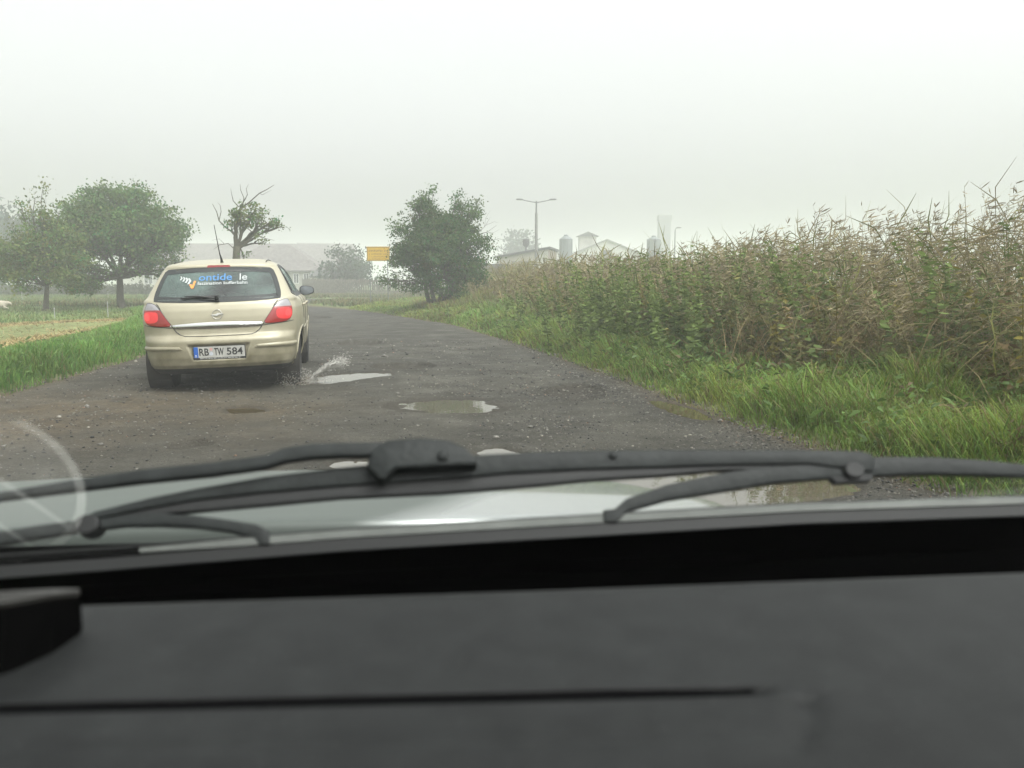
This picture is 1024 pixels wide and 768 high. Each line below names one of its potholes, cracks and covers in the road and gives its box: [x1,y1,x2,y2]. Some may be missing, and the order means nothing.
pothole [645,399,715,420]
pothole [297,371,395,385]
pothole [611,473,874,506]
pothole [471,446,529,456]
pothole [221,405,271,414]
pothole [382,397,513,415]
